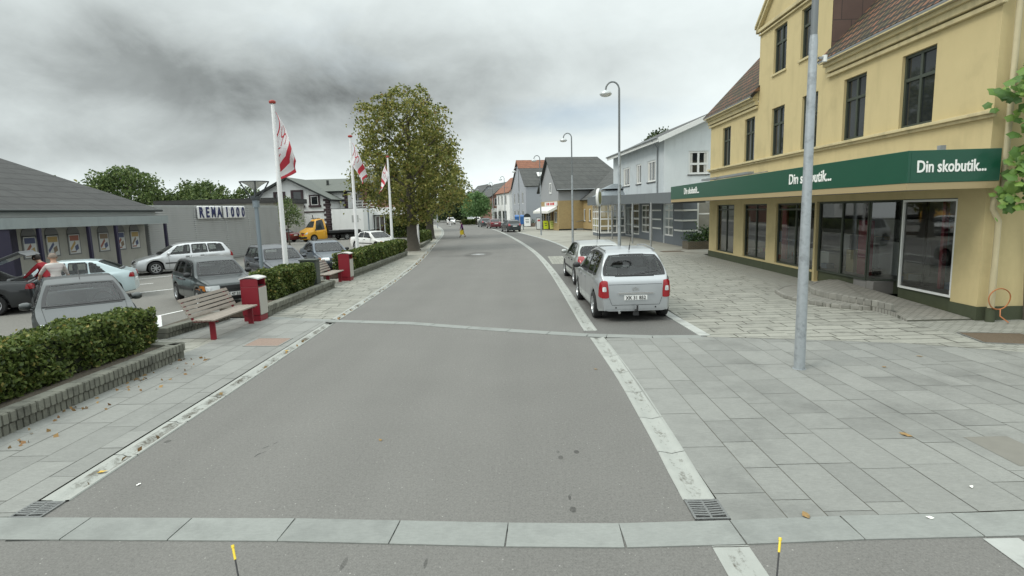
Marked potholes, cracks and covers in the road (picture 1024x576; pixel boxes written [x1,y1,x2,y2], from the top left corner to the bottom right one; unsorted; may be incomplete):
drain grate [684,499,731,521]
drain grate [8,501,66,518]
